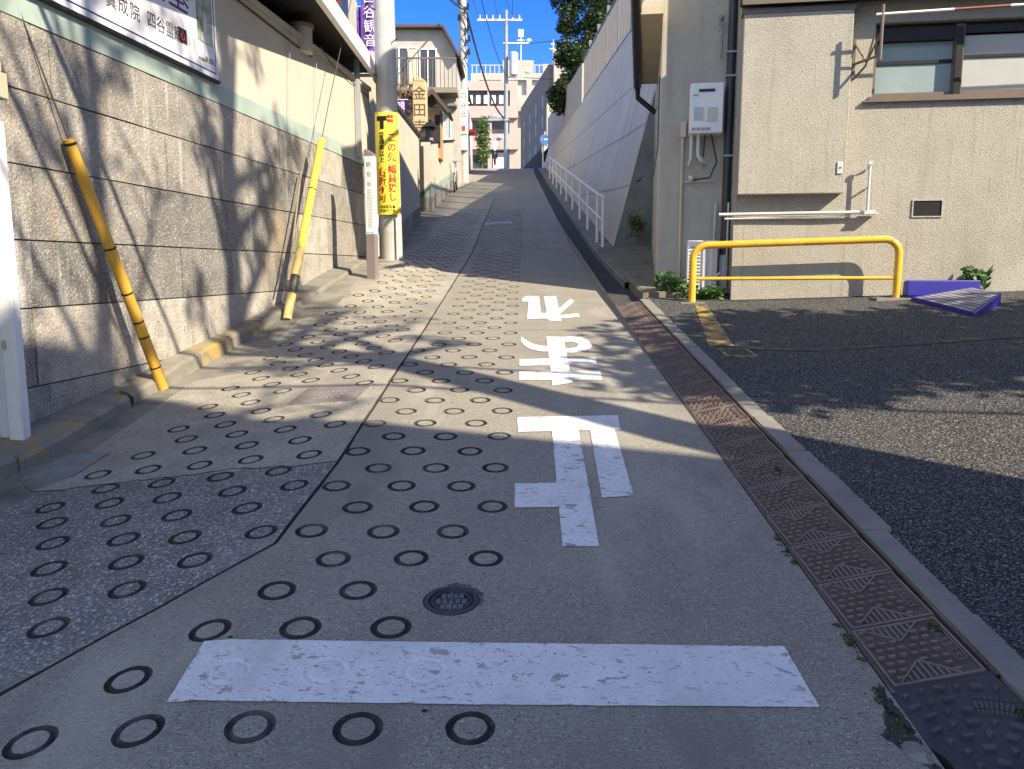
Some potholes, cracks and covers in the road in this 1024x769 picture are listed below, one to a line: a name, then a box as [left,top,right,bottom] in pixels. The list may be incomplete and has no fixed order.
manhole cover [424,586,479,616]
manhole cover [287,385,369,405]
